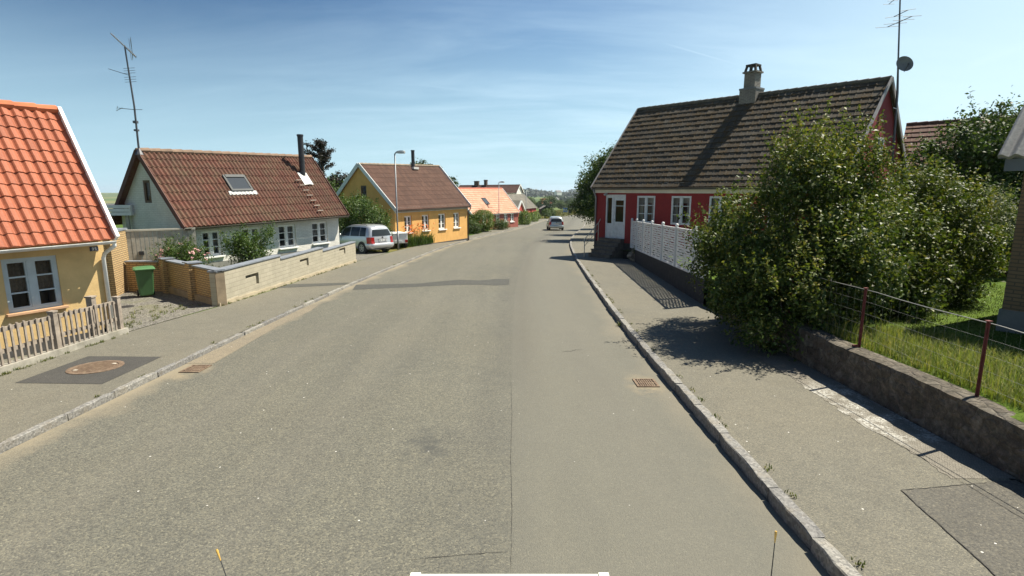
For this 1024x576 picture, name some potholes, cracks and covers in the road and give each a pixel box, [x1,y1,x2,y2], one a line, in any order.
manhole cover [65,360,125,375]
drain grate [632,379,660,387]
drain grate [178,365,212,373]
